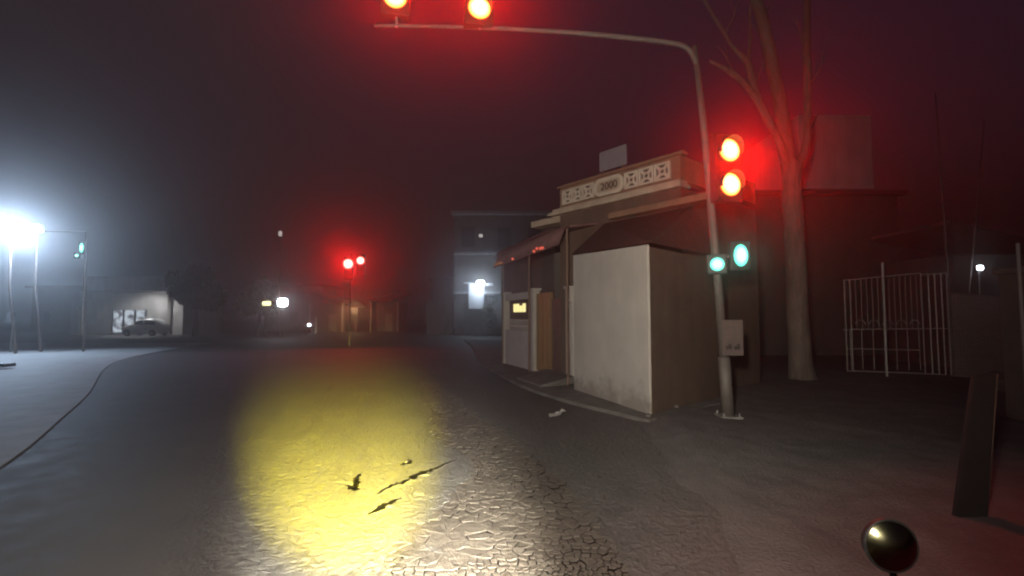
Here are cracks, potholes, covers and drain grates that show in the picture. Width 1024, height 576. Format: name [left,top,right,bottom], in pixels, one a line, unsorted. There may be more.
crack [368,382,630,576]
